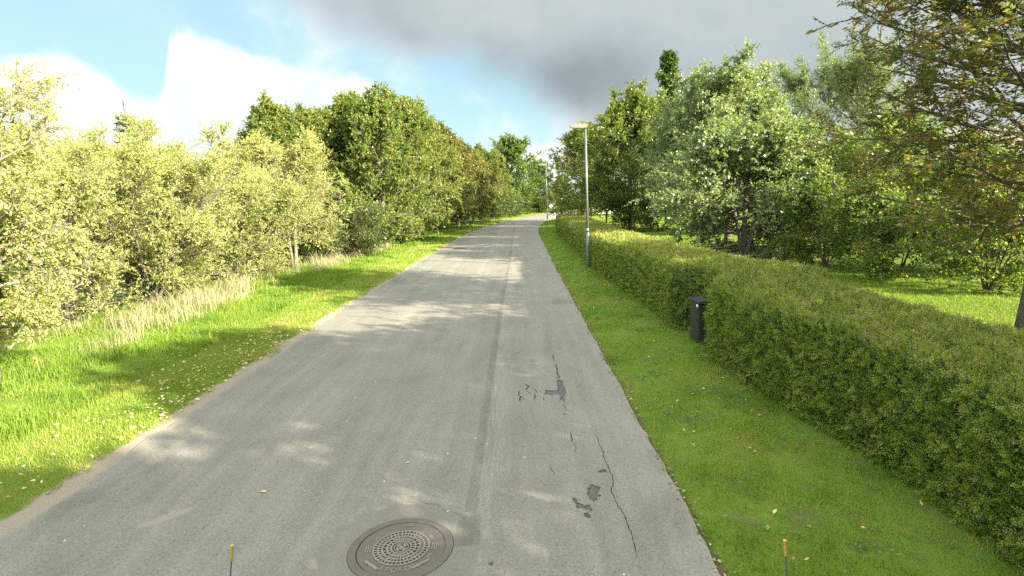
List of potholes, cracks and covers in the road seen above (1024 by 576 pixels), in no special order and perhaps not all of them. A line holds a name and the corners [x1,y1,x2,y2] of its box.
pothole [584,484,601,501]
pothole [544,380,567,404]
pothole [571,498,595,512]
crack [595,434,637,557]
manhole cover [347,518,454,576]
